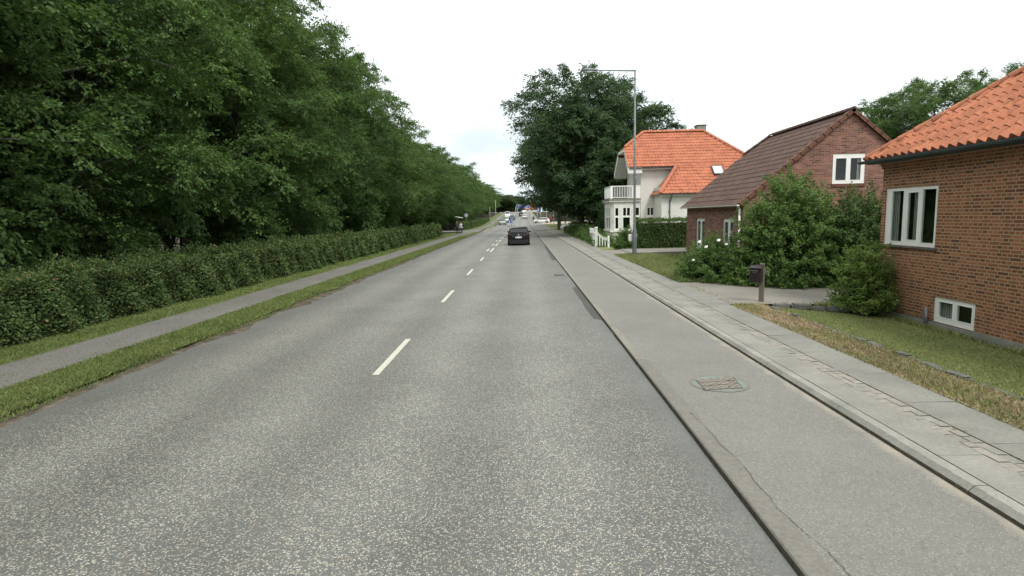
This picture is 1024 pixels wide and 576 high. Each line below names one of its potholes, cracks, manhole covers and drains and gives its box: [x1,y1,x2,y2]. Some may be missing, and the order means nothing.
manhole cover [689,375,751,392]
